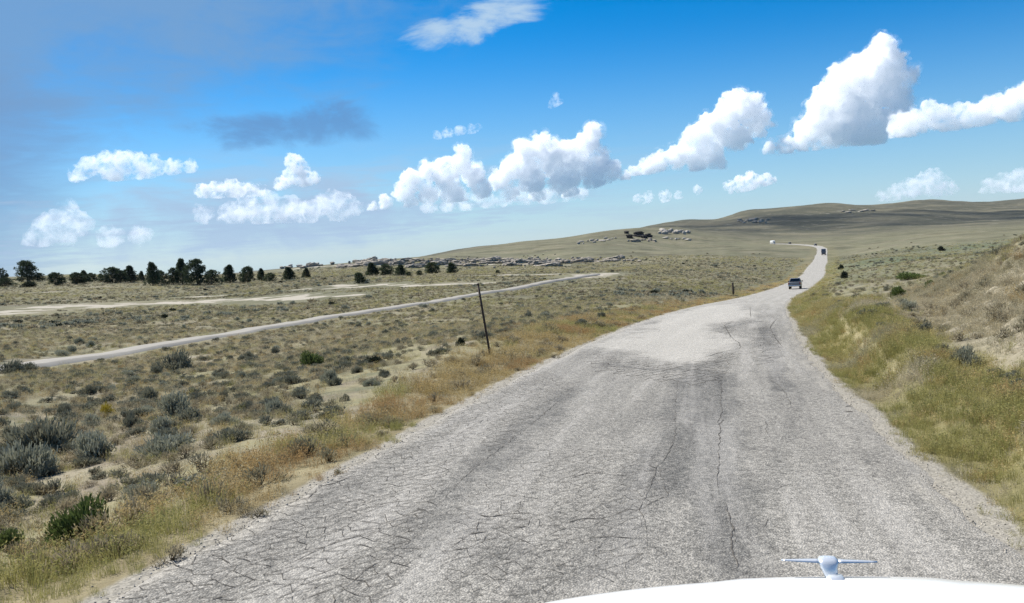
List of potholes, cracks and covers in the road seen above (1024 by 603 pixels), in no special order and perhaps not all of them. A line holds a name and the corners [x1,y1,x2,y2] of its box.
crack [118,370,578,603]
crack [584,311,781,486]
crack [442,384,678,595]
